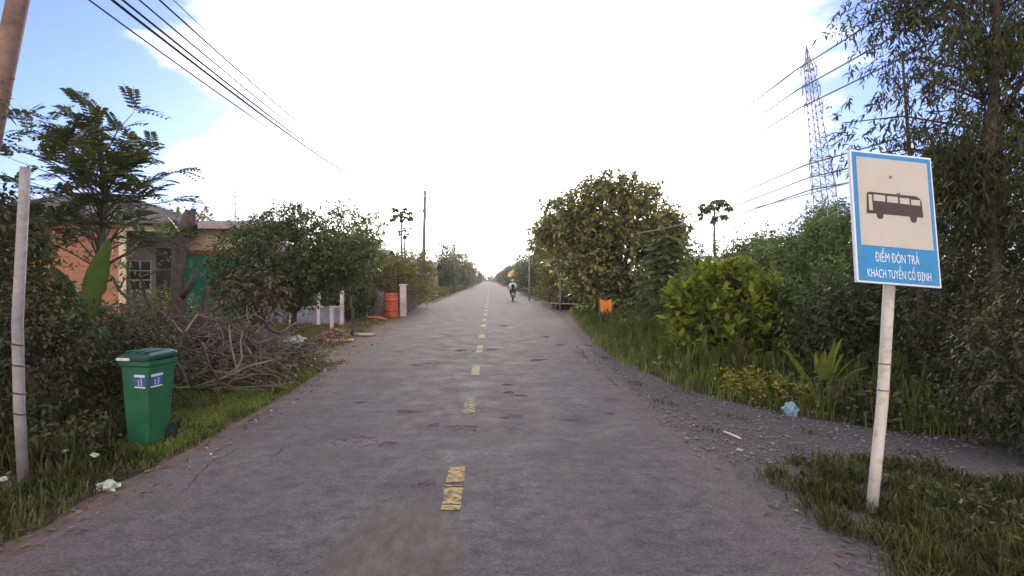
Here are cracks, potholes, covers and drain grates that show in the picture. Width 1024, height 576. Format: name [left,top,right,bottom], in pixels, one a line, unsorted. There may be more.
pothole [410,480,437,489]
crack [187,447,240,489]
pothole [325,435,378,448]
